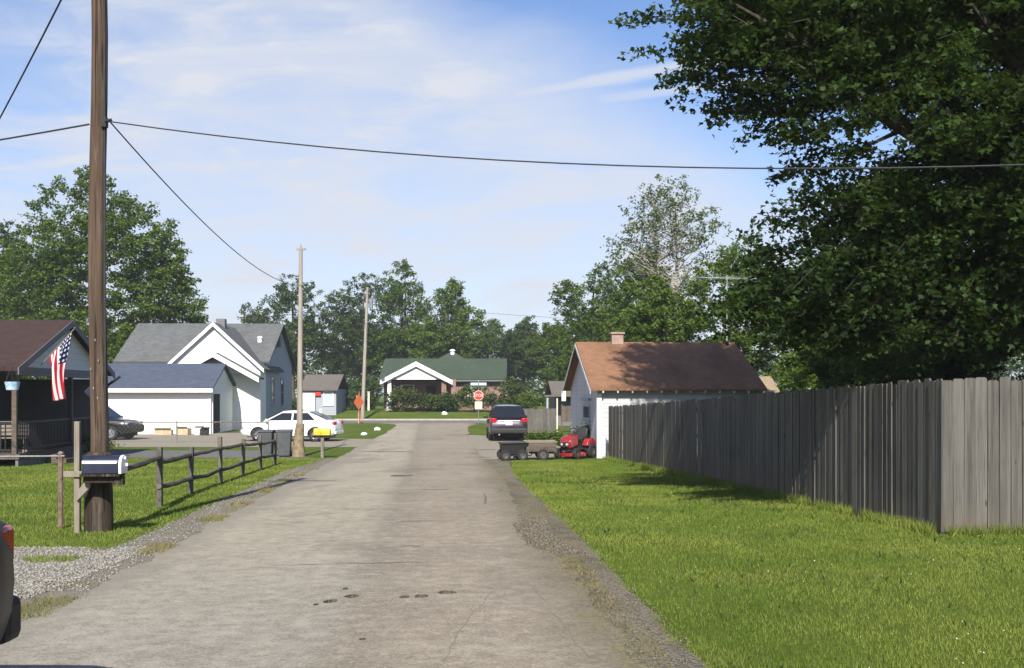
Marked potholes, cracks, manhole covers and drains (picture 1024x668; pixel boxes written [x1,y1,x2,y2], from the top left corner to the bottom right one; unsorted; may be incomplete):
crack [444,589,492,661]
